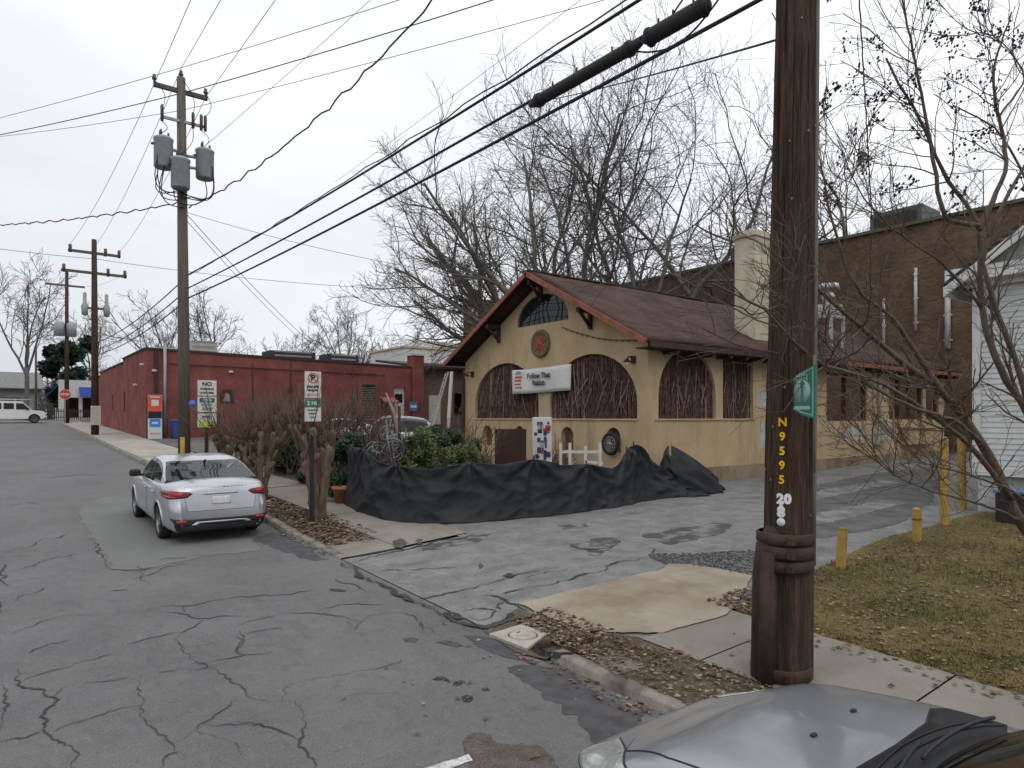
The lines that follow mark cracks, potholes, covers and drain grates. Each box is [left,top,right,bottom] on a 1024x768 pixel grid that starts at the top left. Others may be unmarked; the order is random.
manhole cover [489,624,547,651]
crack [0,535,72,612]
crack [92,538,183,591]
crack [1,570,562,768]
